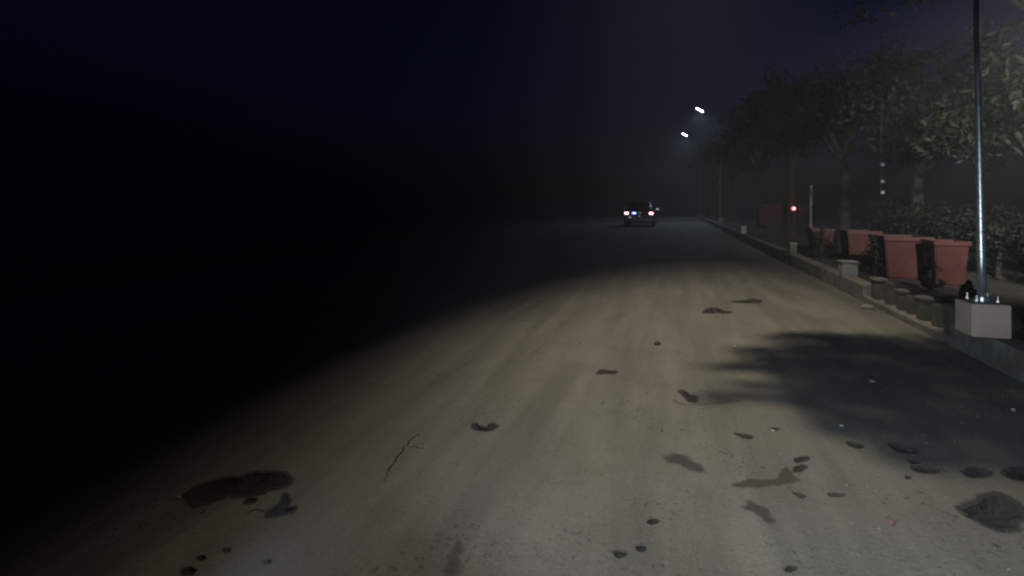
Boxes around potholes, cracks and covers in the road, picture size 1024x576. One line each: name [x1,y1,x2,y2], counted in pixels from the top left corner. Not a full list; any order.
crack [384,433,423,481]
pothole [956,491,1024,532]
pothole [264,492,299,517]
pothole [910,466,940,474]
pothole [471,422,499,432]
pothole [887,443,918,454]
pothole [678,390,699,402]
pothole [182,470,295,507]
pothole [1000,467,1024,482]
pothole [959,467,993,478]
